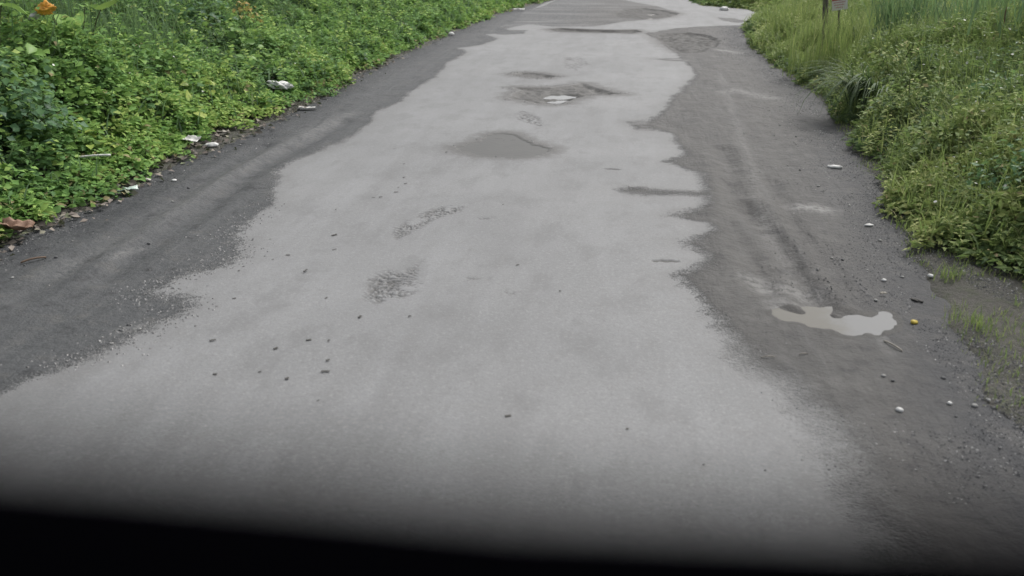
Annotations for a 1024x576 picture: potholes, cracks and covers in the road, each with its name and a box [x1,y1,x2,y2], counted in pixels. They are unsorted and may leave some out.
pothole [456,133,553,157]
pothole [506,83,625,105]
pothole [655,32,722,53]
pothole [764,304,905,339]
